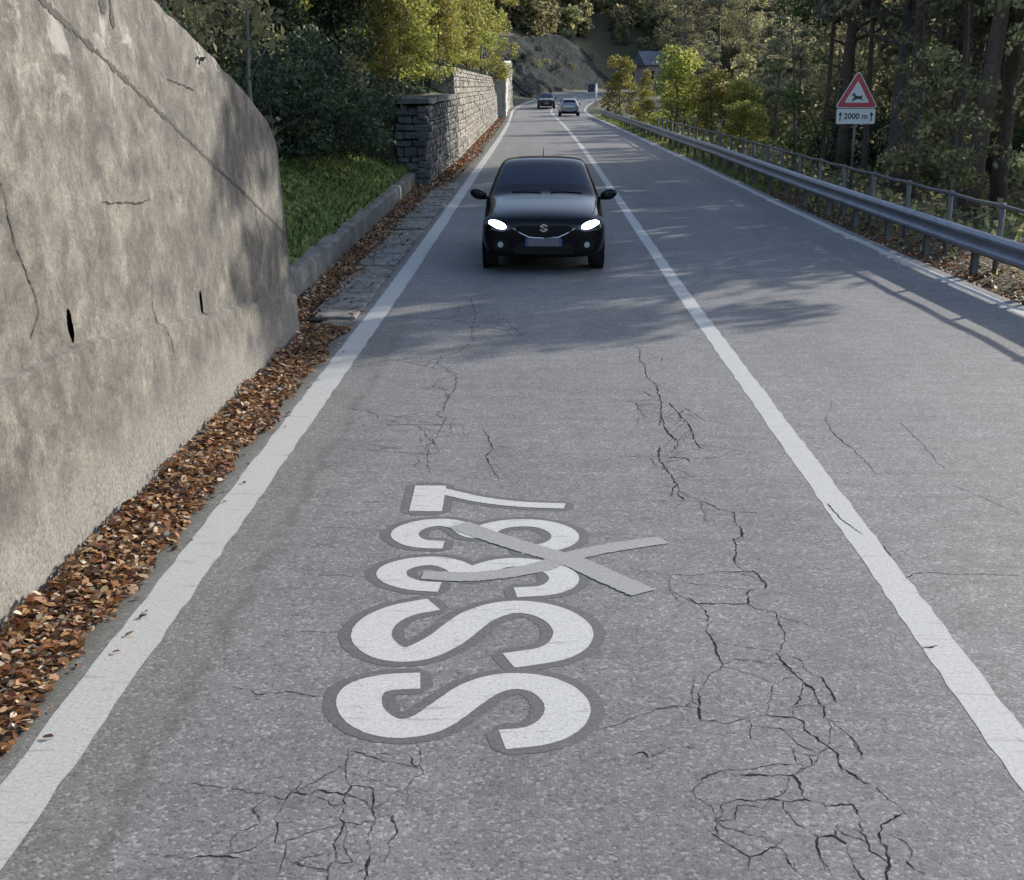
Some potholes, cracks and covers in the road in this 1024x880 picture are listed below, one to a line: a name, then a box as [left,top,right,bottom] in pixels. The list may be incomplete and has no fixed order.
crack [142,746,424,880]
crack [349,302,523,472]
crack [597,346,925,880]
